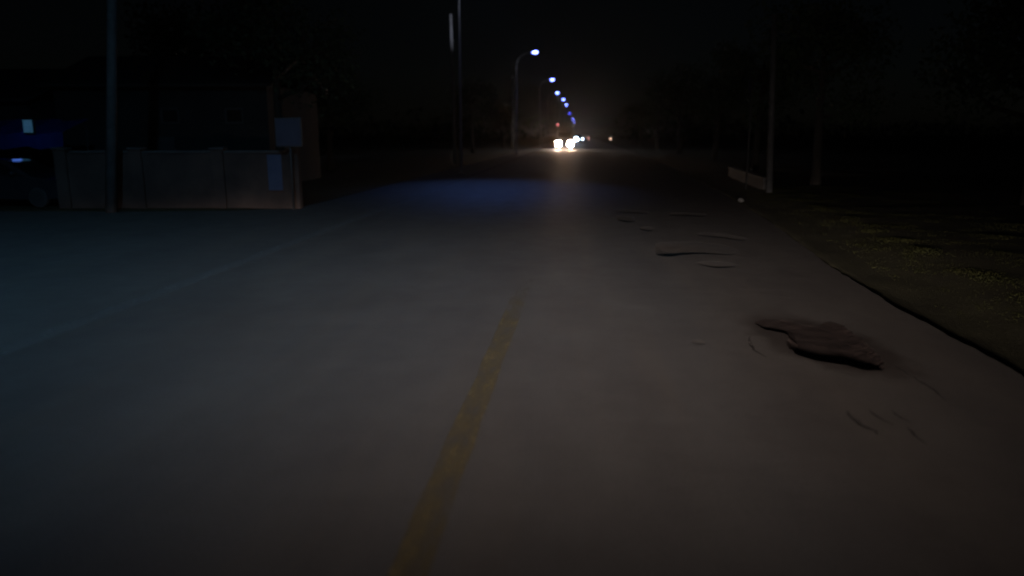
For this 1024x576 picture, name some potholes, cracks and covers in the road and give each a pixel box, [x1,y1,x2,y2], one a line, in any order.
pothole [653,242,738,257]
pothole [755,319,884,371]
pothole [696,232,747,241]
crack [846,363,945,444]
crack [748,337,766,357]
